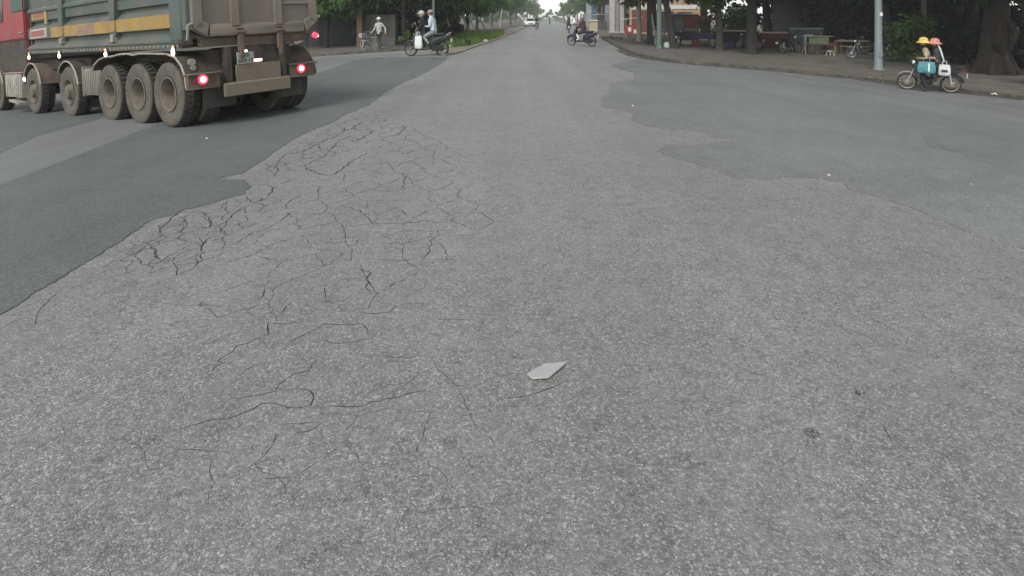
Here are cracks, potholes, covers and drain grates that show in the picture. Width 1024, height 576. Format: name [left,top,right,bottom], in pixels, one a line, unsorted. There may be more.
crack [104,107,494,504]
pothole [803,428,821,439]
